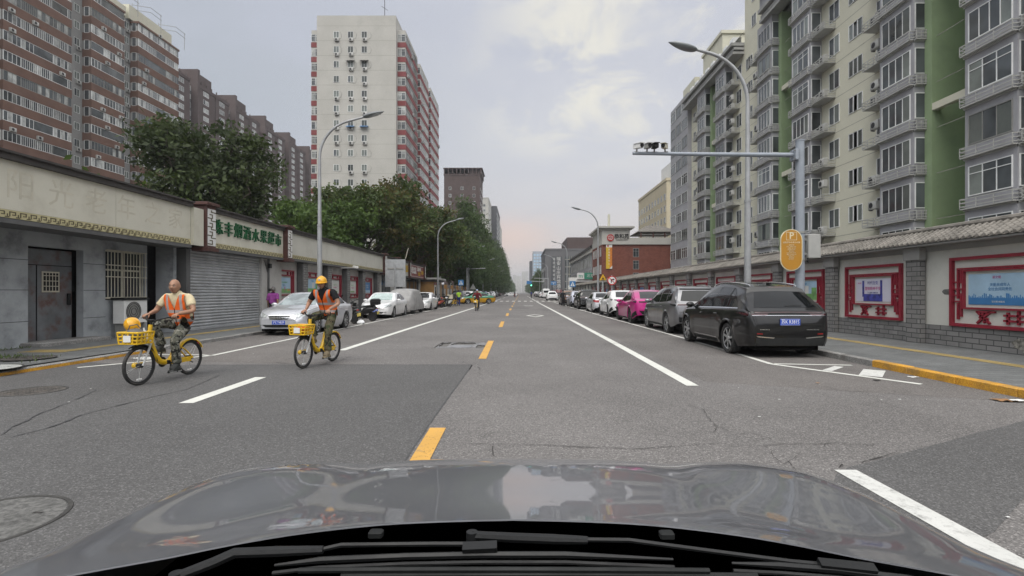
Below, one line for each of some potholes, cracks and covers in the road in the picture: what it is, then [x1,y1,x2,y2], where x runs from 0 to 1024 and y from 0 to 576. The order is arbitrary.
crack [471,406,899,470]
manhole cover [0,495,74,542]
manhole cover [0,386,69,397]
